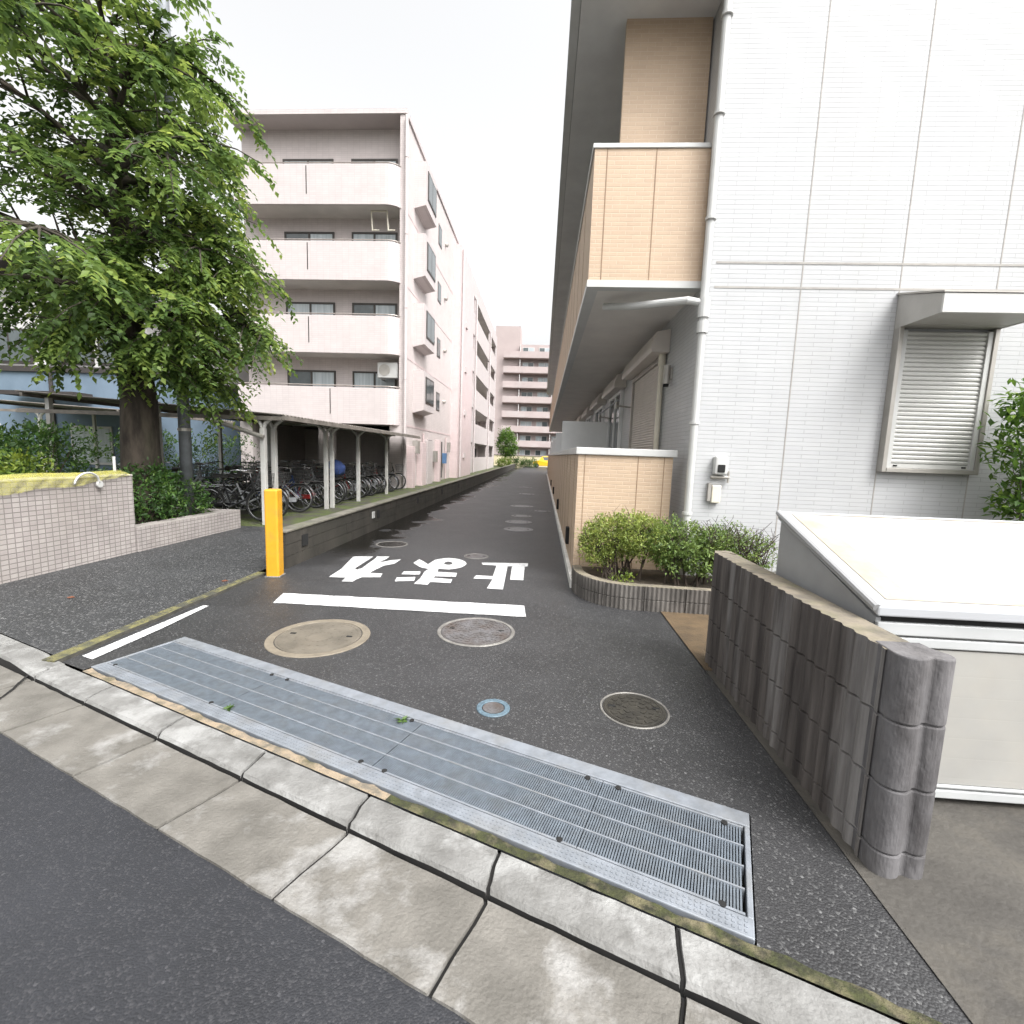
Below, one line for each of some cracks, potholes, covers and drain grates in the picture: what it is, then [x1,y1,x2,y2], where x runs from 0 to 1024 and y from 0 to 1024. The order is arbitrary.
drain grate [217,676,424,768]
manhole cover [600,692,670,729]
manhole cover [437,617,515,647]
manhole cover [264,619,371,658]
manhole cover [476,699,510,718]
drain grate [577,781,745,916]
drain grate [371,723,603,849]
drain grate [108,641,280,707]
